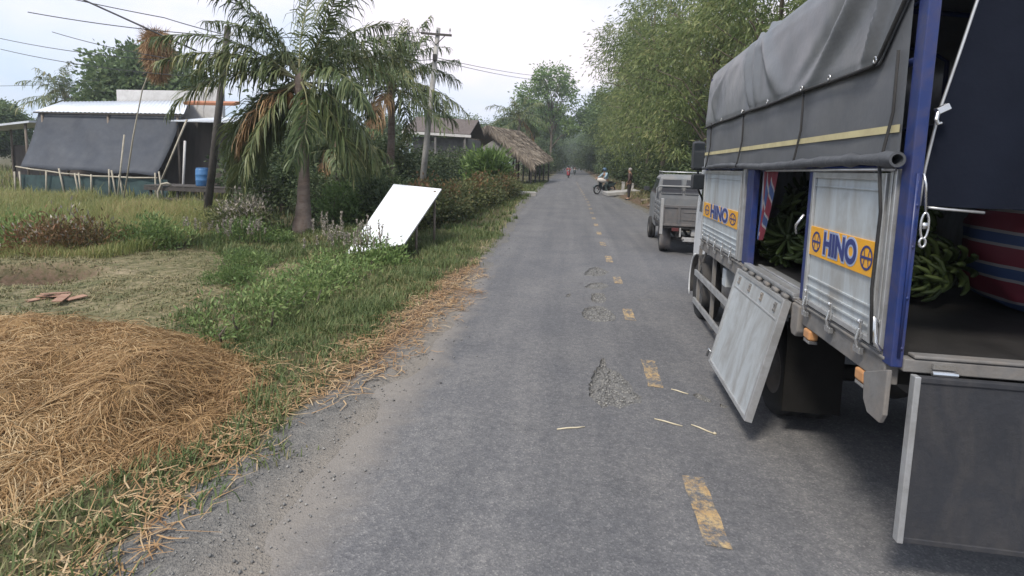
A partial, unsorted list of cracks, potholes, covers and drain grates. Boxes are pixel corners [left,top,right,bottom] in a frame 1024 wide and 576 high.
pothole [591,293,607,303]
pothole [585,267,608,276]
pothole [588,358,642,409]
pothole [582,306,616,322]
